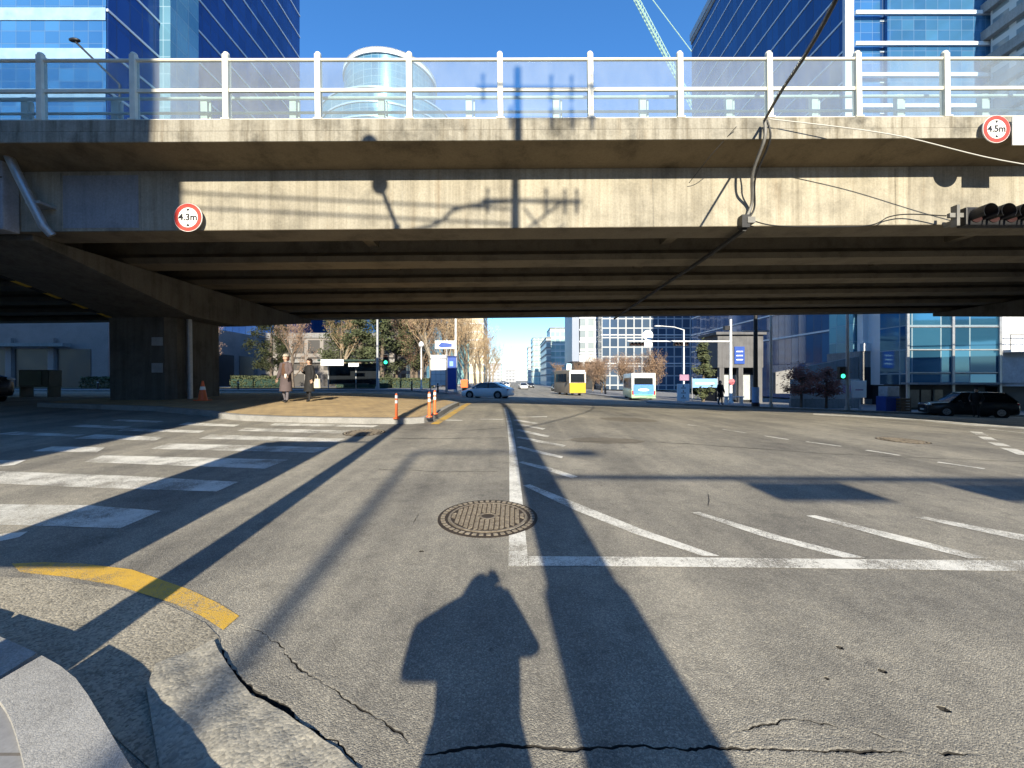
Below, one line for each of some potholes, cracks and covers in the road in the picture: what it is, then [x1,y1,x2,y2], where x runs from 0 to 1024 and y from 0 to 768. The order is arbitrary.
crack [219,619,1002,768]
manhole cover [438,500,538,538]
